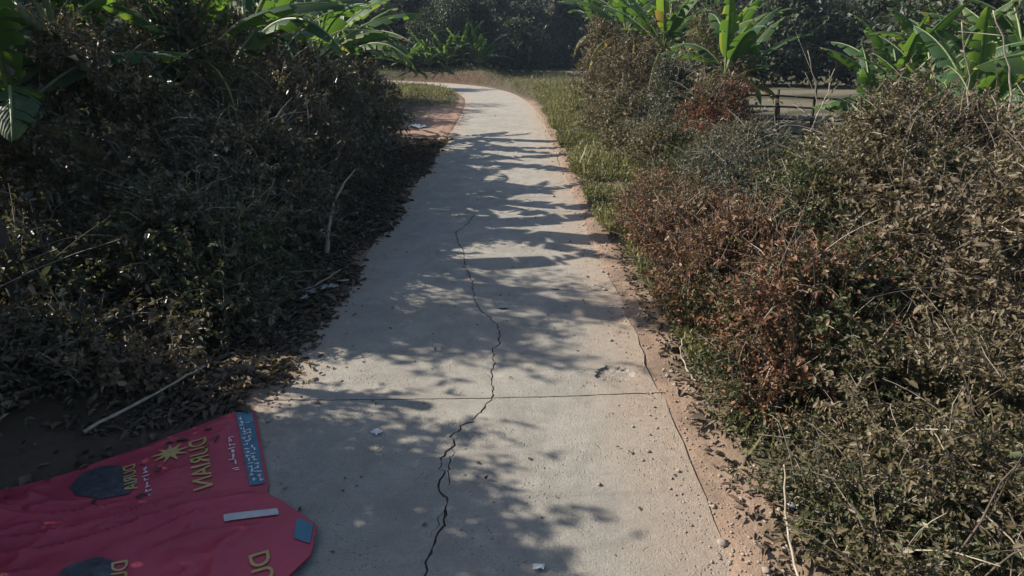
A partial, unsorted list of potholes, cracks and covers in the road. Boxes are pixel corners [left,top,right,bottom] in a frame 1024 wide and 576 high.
pothole [595,365,636,381]
crack [263,210,665,576]
